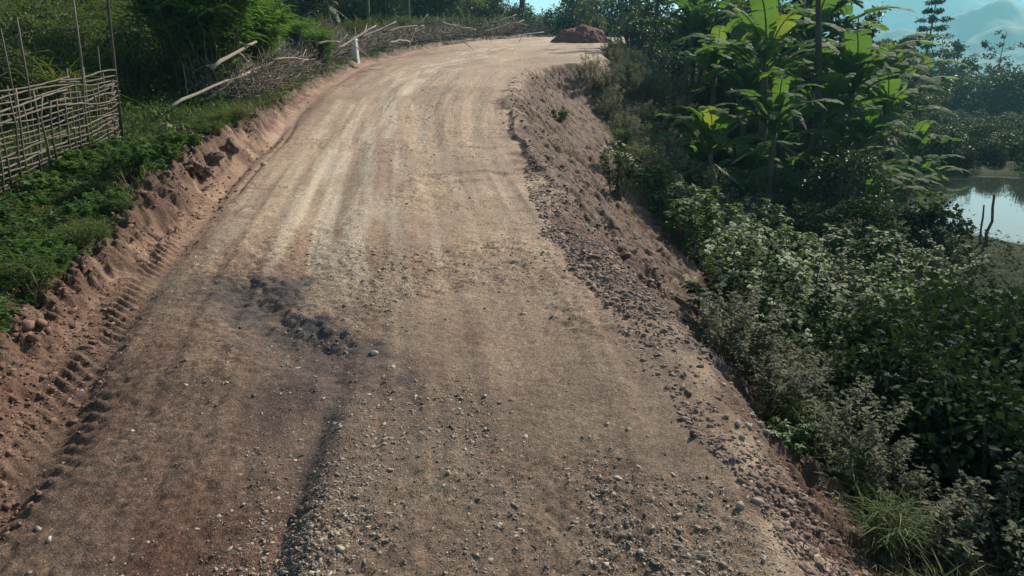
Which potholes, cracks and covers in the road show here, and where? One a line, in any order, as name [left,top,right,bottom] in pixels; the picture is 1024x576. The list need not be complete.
pothole [197,275,379,429]
